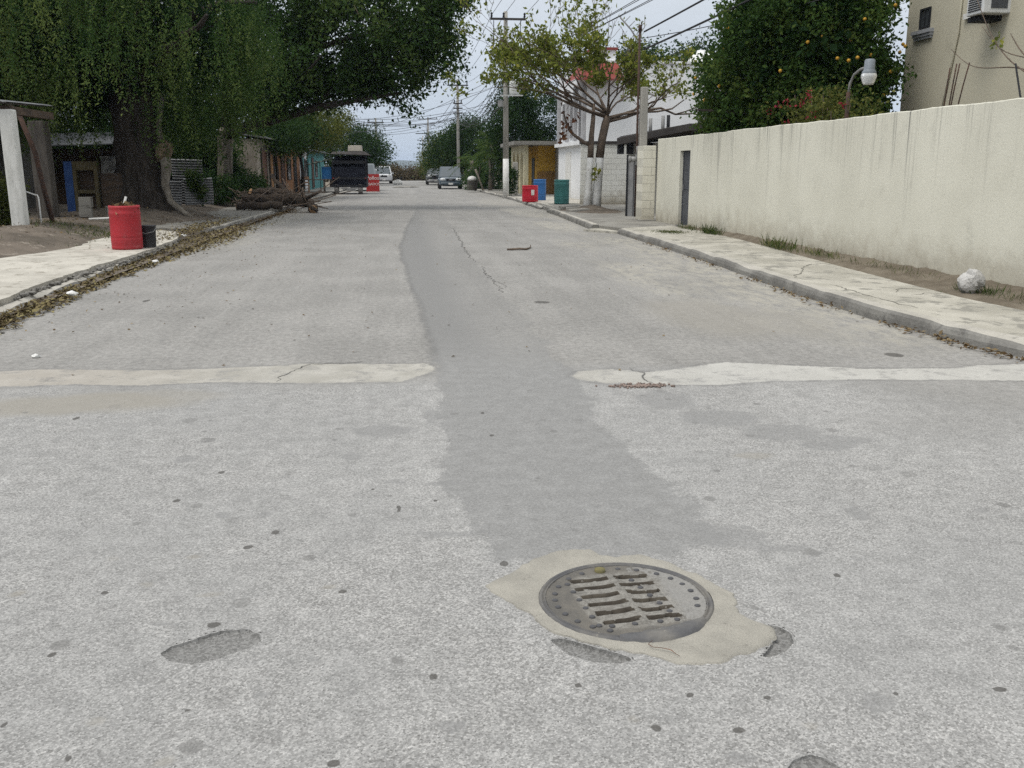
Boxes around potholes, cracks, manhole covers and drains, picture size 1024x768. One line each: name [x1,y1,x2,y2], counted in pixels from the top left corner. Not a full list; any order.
pothole [761,624,796,659]
pothole [158,628,264,666]
pothole [784,752,841,768]
manhole cover [486,549,777,665]
